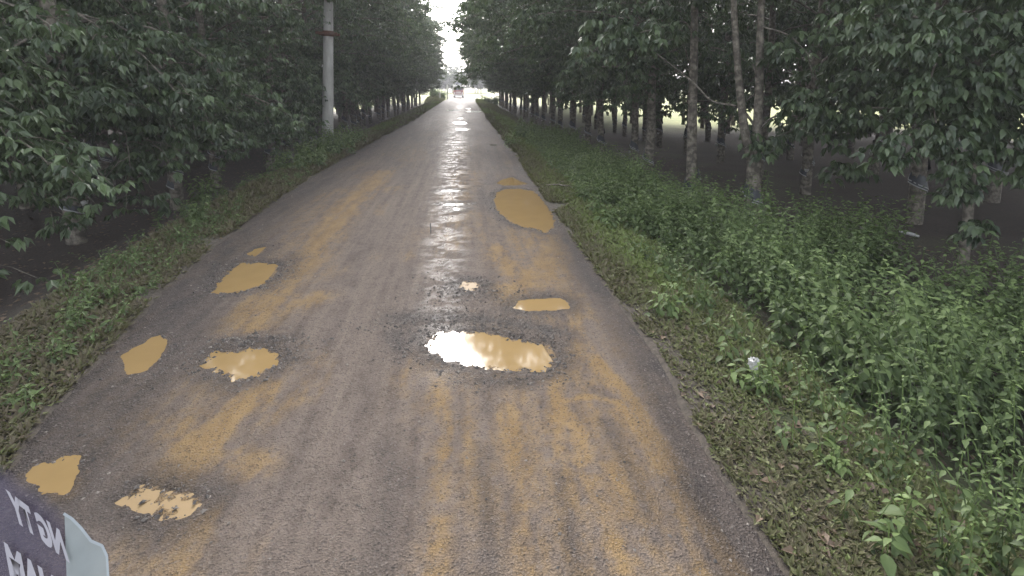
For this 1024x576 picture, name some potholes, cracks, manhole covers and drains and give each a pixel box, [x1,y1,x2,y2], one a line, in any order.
pothole [130,326,335,402]
pothole [7,434,111,513]
pothole [503,291,596,316]
pothole [324,299,596,393]
pothole [95,474,220,533]
pothole [472,184,563,235]
pothole [494,176,533,187]
